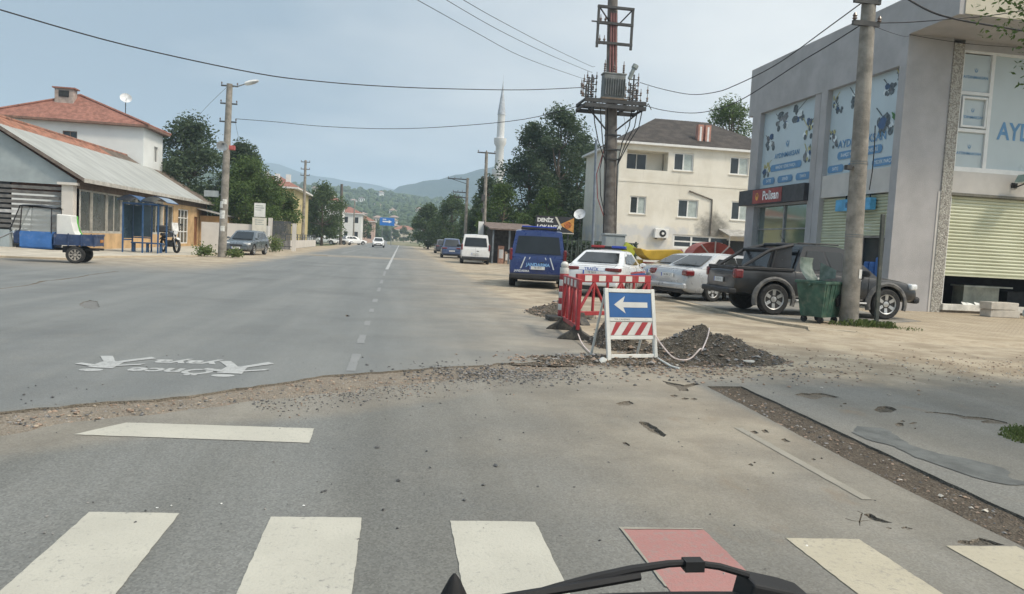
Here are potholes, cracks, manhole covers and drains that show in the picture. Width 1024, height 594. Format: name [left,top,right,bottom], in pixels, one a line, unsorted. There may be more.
pothole [80,300,100,309]
pothole [663,381,701,391]
pothole [640,422,666,437]
crack [926,412,1008,424]
crack [0,271,117,289]
